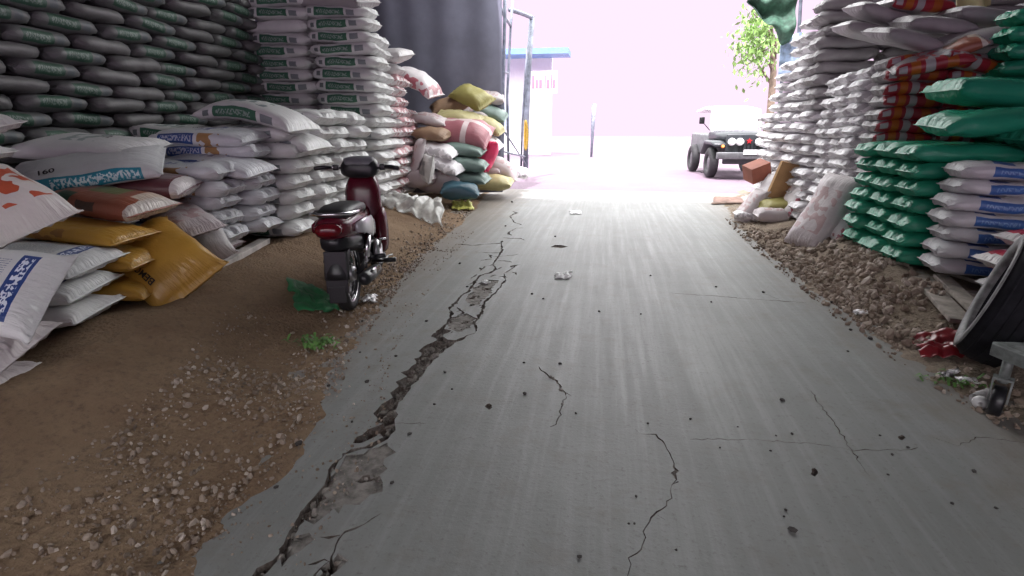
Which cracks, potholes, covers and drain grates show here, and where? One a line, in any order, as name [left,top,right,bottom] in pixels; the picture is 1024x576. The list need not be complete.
crack [539,367,571,427]
crack [699,438,918,451]
crack [252,211,524,576]
crack [627,434,679,576]
